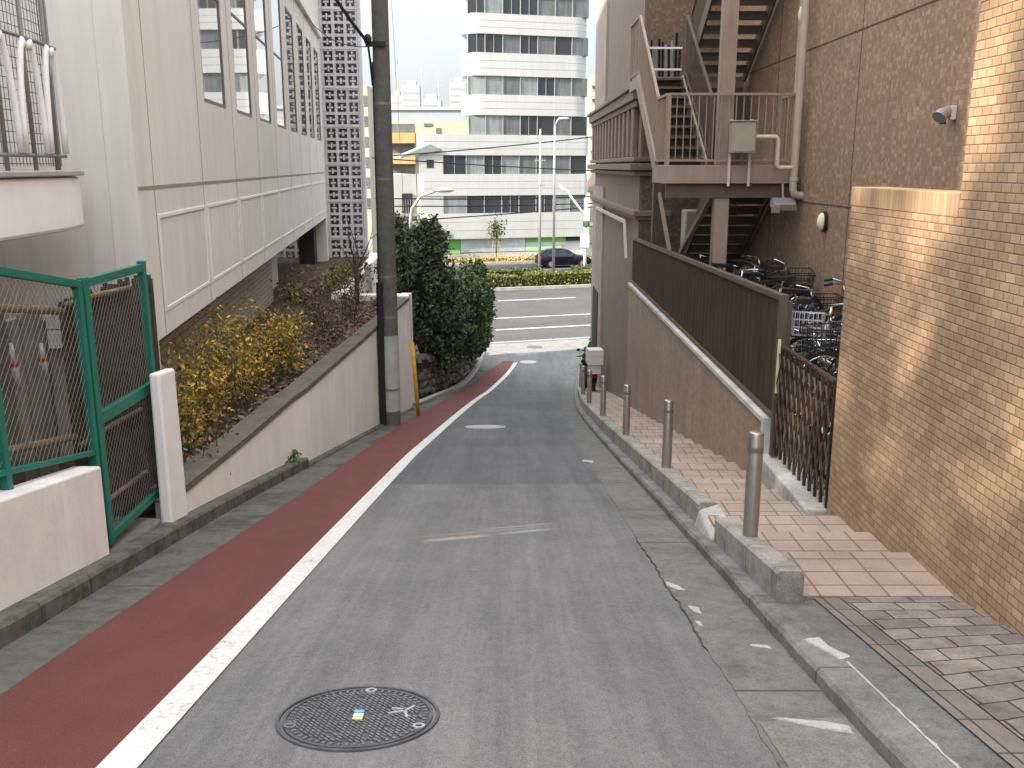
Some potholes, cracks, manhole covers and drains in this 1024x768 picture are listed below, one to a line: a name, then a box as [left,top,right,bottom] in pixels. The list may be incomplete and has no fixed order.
crack [636,537,708,650]
manhole cover [275,686,440,752]
